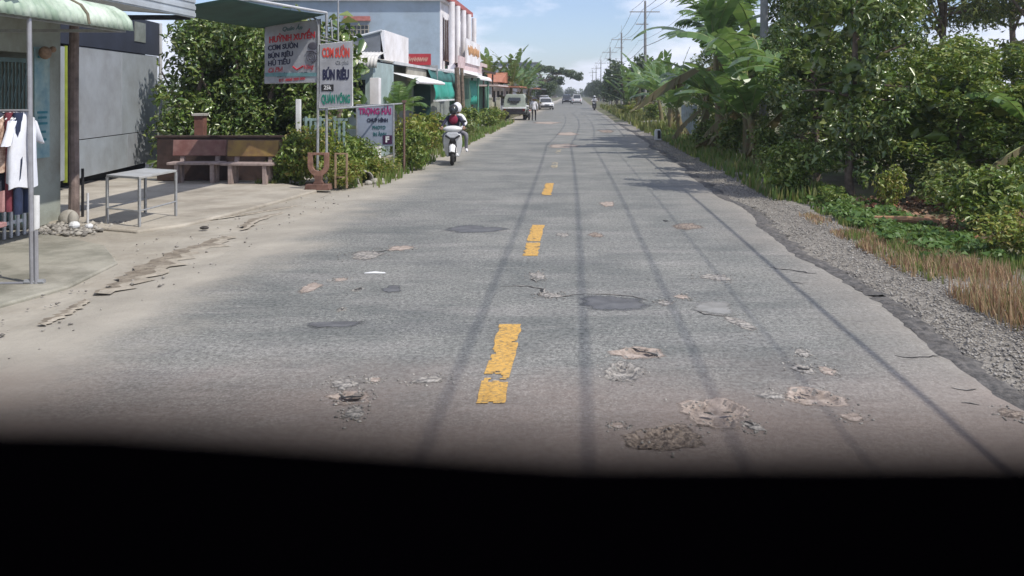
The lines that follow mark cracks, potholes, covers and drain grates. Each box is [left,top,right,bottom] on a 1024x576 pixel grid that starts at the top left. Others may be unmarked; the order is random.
pothole [608,346,665,359]
pothole [998,408,1024,417]
crack [614,122,1024,410]
pothole [785,386,849,407]
pothole [678,397,752,429]
pothole [633,423,694,433]
pothole [743,421,766,431]
pothole [758,391,783,399]
pothole [343,405,364,418]
pothole [325,391,371,406]
pothole [603,361,646,382]
crack [501,278,576,297]
